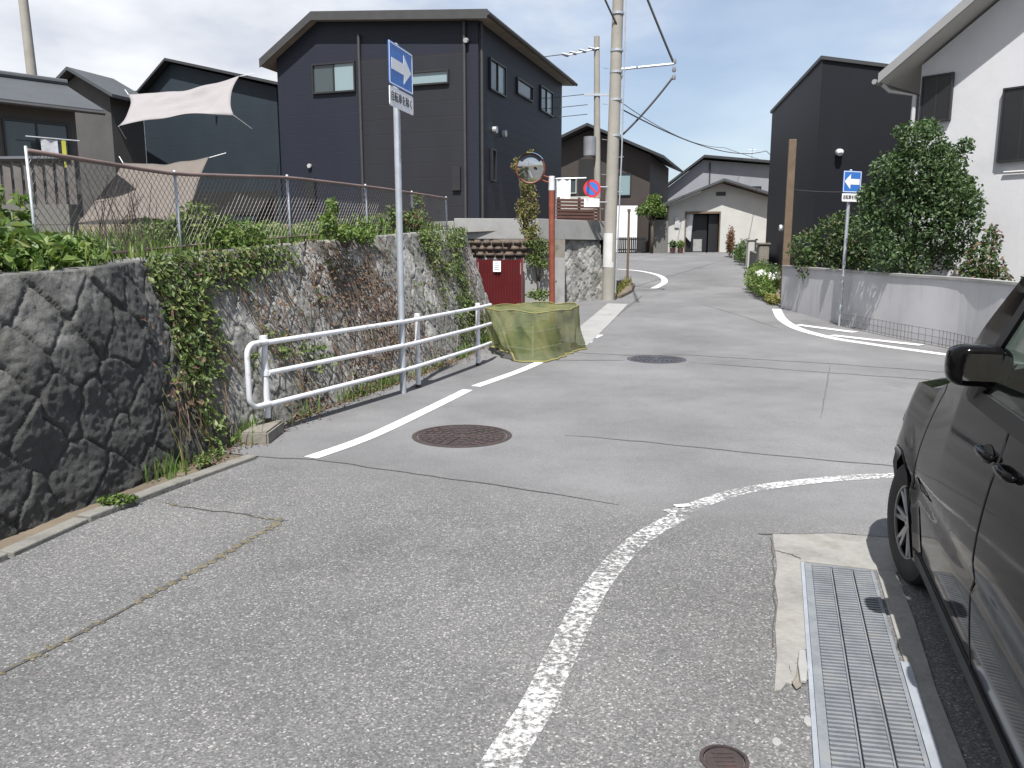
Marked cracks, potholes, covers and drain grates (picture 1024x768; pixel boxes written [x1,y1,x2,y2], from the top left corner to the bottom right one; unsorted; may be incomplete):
crack [164,502,283,521]
manhole cover [412,424,512,448]
manhole cover [627,355,686,364]
utility cover [699,744,749,768]
drain grate [801,562,943,768]
